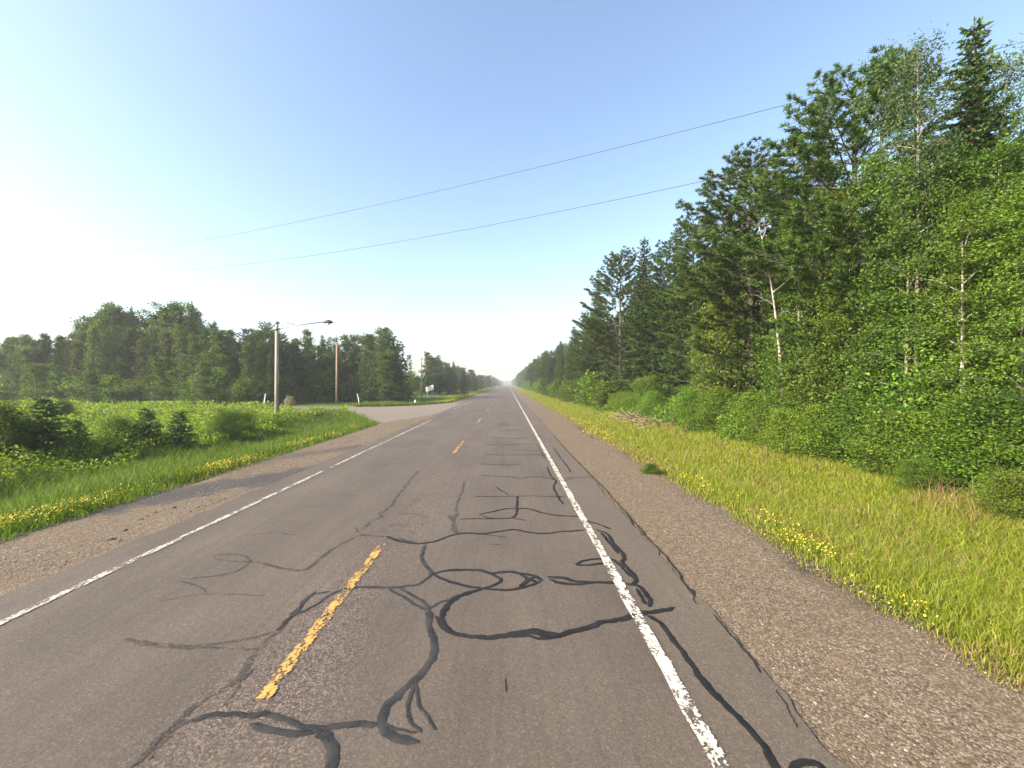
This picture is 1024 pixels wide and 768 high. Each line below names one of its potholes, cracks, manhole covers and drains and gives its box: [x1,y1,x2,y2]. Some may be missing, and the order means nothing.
crack [123,617,293,768]
